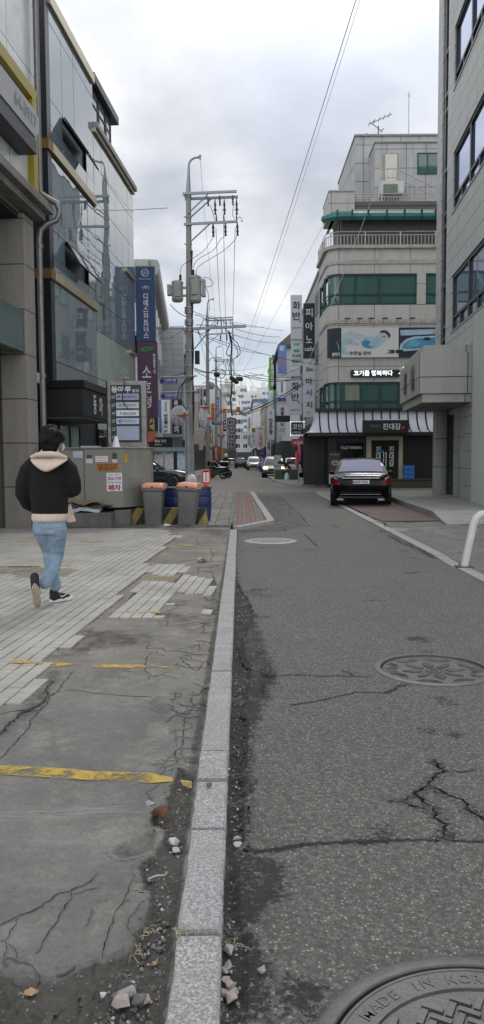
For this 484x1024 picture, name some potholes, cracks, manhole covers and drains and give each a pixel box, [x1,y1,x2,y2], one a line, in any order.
crack [0,538,224,800]
manhole cover [316,956,484,1024]
crack [238,643,484,852]
manhole cover [374,653,484,687]
crack [0,873,142,983]
